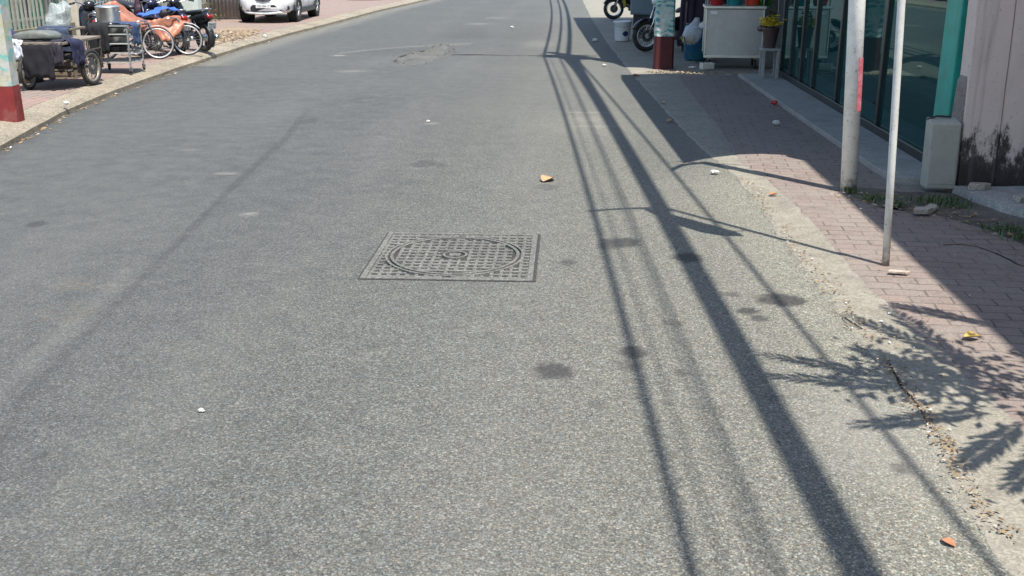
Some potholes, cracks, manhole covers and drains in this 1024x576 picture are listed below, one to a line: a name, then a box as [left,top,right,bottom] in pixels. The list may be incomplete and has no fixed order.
crack [888,362,925,419]
manhole cover [357,232,541,282]
pothole [380,42,467,66]
